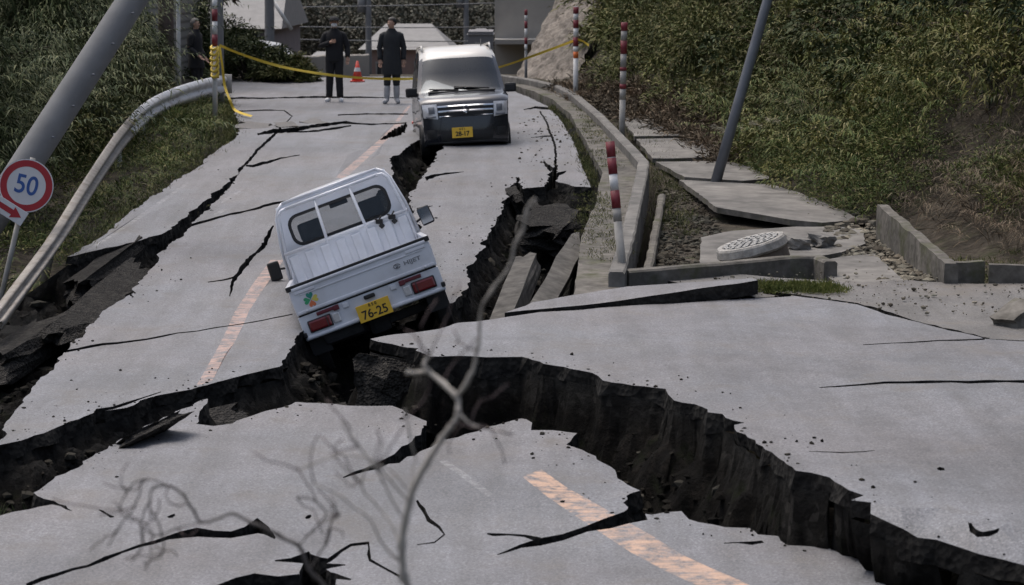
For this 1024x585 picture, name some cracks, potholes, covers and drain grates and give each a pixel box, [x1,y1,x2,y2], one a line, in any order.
crack [257,121,407,136]
crack [0,340,1014,585]
crack [234,109,292,122]
crack [230,96,394,114]
crack [531,111,566,189]
crack [192,201,284,231]
crack [68,314,293,352]
crack [338,113,408,124]
crack [210,226,274,296]
crack [425,172,460,181]
manhole cover [716,231,790,261]
